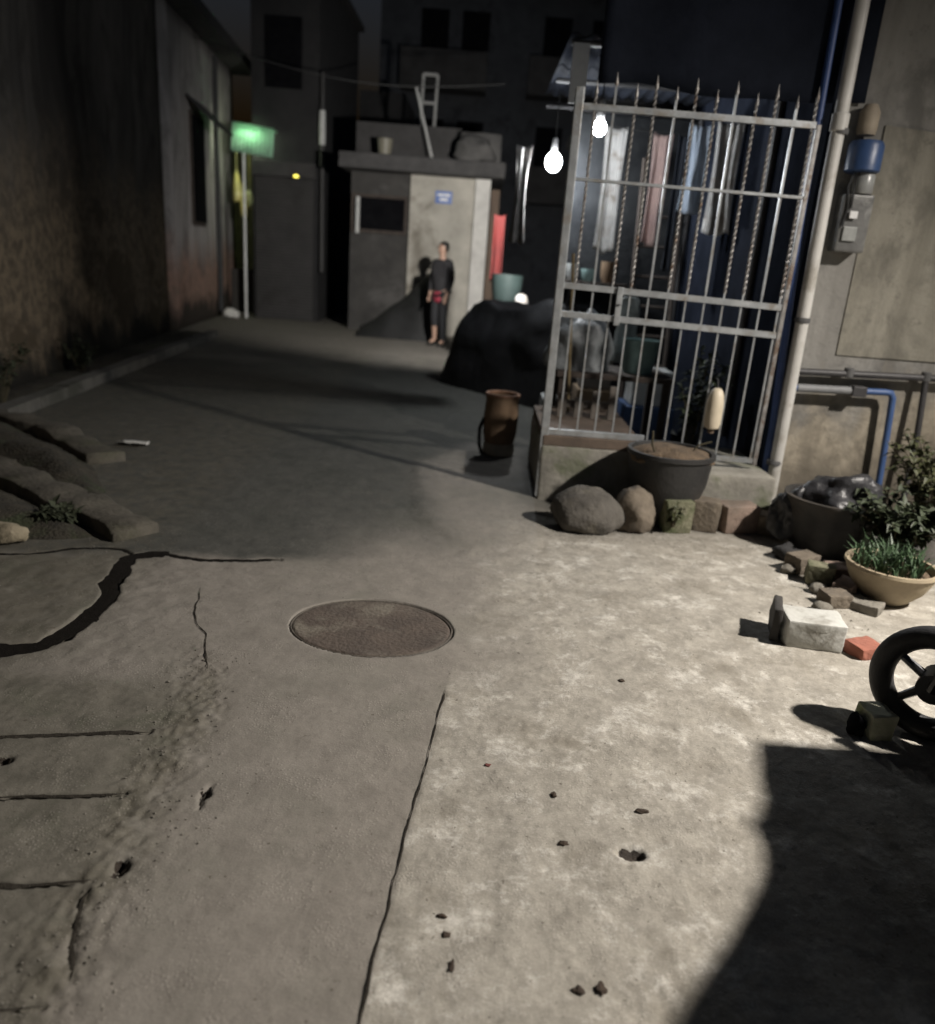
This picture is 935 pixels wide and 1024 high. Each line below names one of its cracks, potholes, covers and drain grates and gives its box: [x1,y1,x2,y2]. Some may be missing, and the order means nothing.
pothole [109,861,129,879]
crack [0,879,100,982]
manhole cover [289,600,453,658]
crack [0,547,276,671]
pothole [619,849,646,862]
